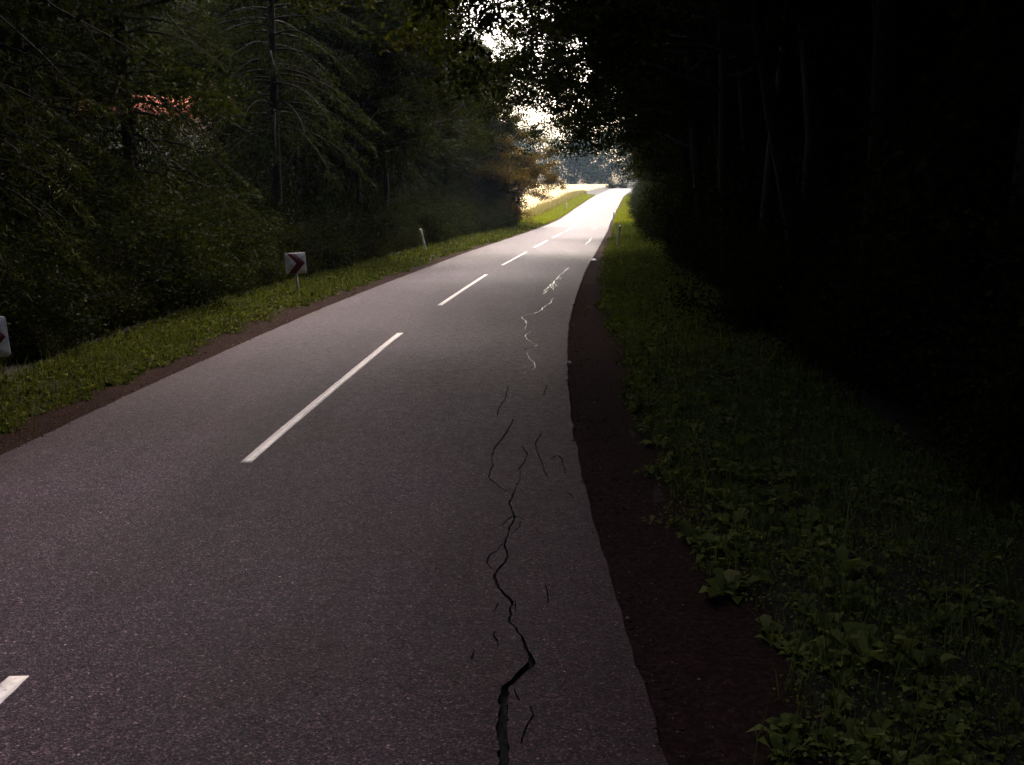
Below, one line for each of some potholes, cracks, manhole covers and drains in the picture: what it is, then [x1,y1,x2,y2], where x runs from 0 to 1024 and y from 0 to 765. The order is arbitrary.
crack [471,268,573,765]
